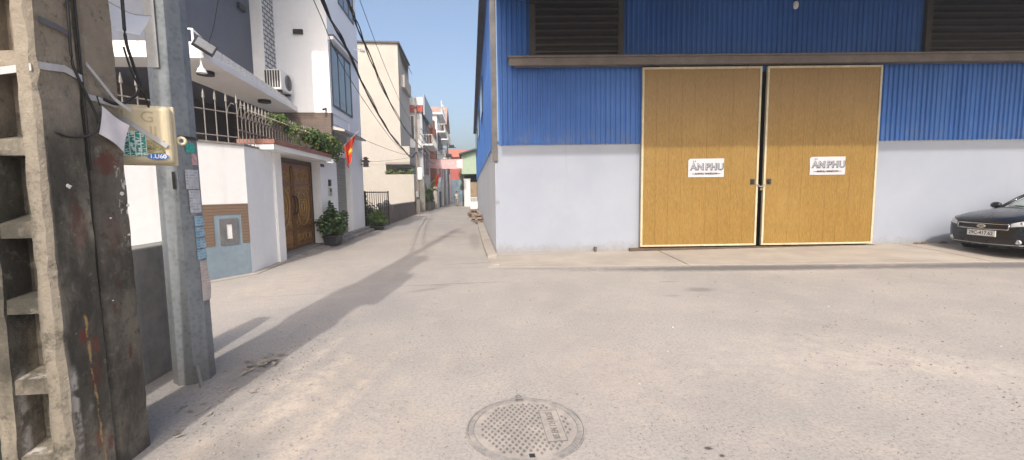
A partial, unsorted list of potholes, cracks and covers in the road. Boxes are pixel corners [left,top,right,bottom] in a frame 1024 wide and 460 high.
manhole cover [466,395,585,460]
